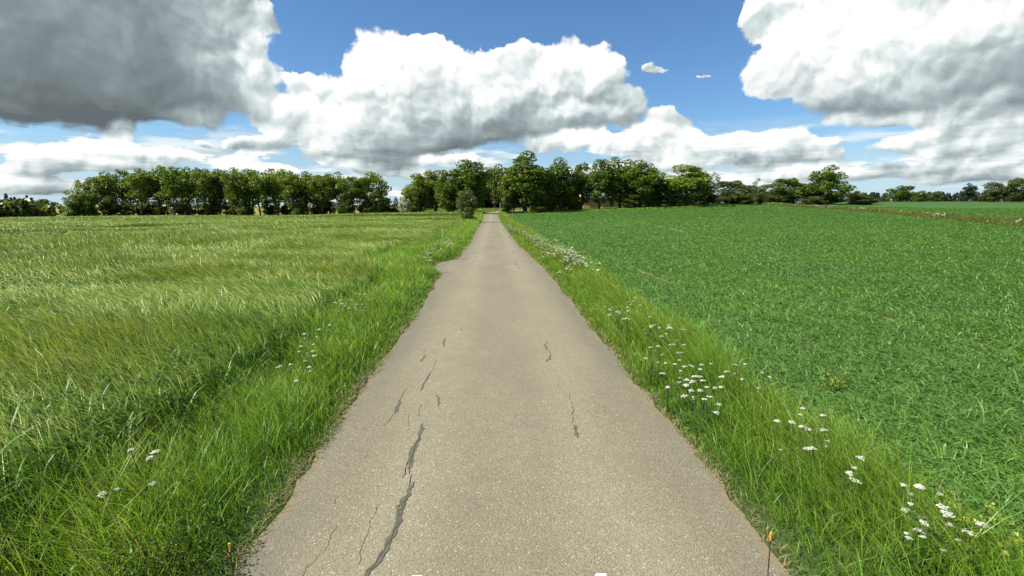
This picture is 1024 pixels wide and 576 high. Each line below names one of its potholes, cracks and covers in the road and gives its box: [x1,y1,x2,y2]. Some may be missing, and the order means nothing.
crack [389,400,420,426]
